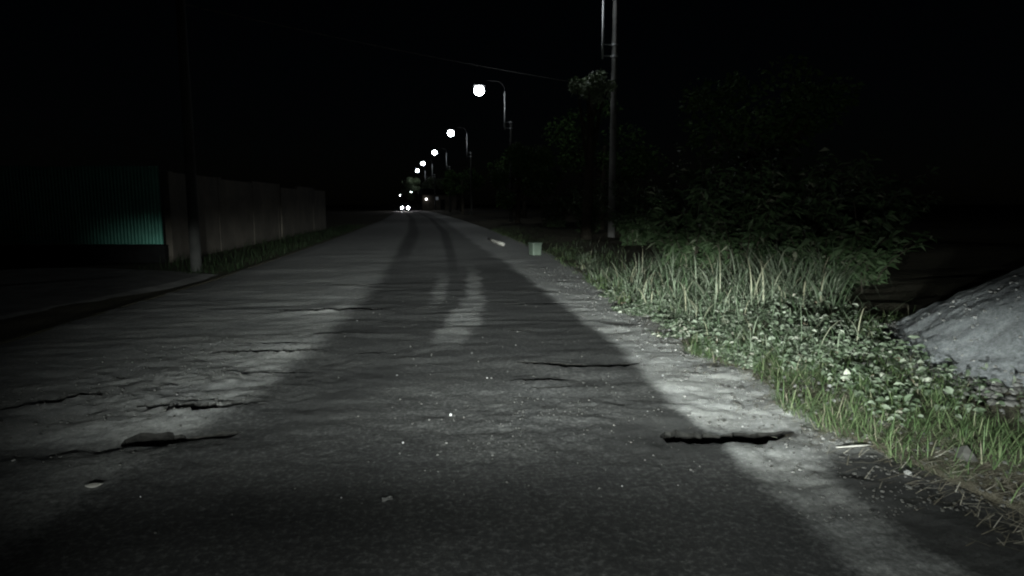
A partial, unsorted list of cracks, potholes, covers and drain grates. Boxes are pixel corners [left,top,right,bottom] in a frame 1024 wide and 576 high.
pothole [120,431,242,447]
pothole [660,429,794,445]
